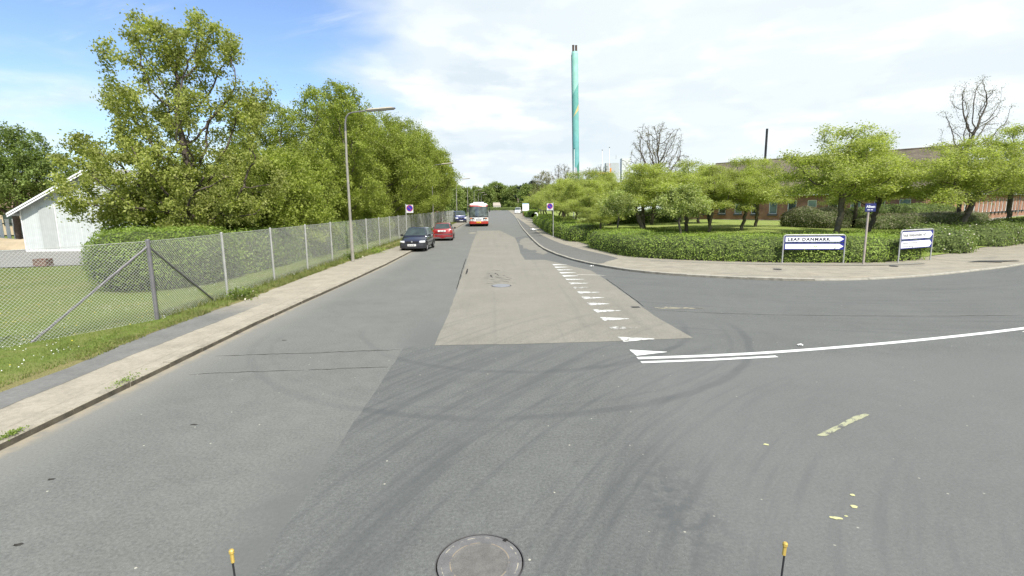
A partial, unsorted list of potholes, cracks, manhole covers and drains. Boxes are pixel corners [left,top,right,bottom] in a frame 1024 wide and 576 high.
manhole cover [434,534,525,576]
